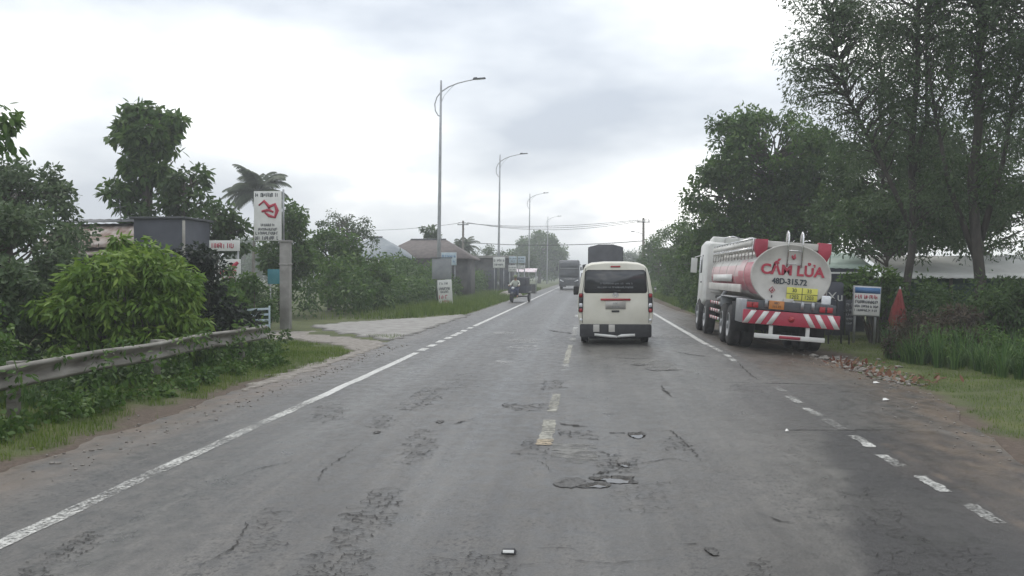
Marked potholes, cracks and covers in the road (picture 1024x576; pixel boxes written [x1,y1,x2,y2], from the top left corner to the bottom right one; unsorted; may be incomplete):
crack [312,373,479,480]
pothole [553,477,590,488]
pothole [589,475,639,484]
crack [218,507,288,556]
crack [511,423,698,514]
